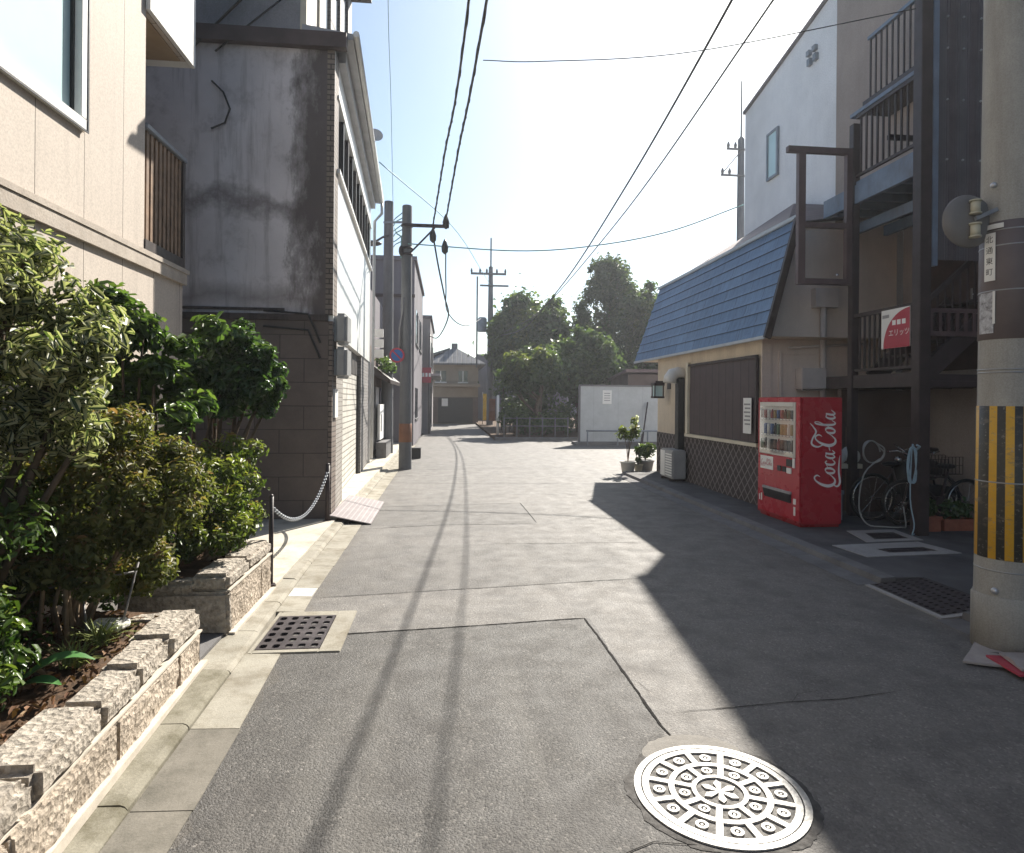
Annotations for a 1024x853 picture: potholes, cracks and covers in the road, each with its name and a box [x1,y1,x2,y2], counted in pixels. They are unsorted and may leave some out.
drain grate [865,577,970,619]
manhole cover [623,735,824,853]
drain grate [247,610,357,654]
crack [348,618,895,736]
